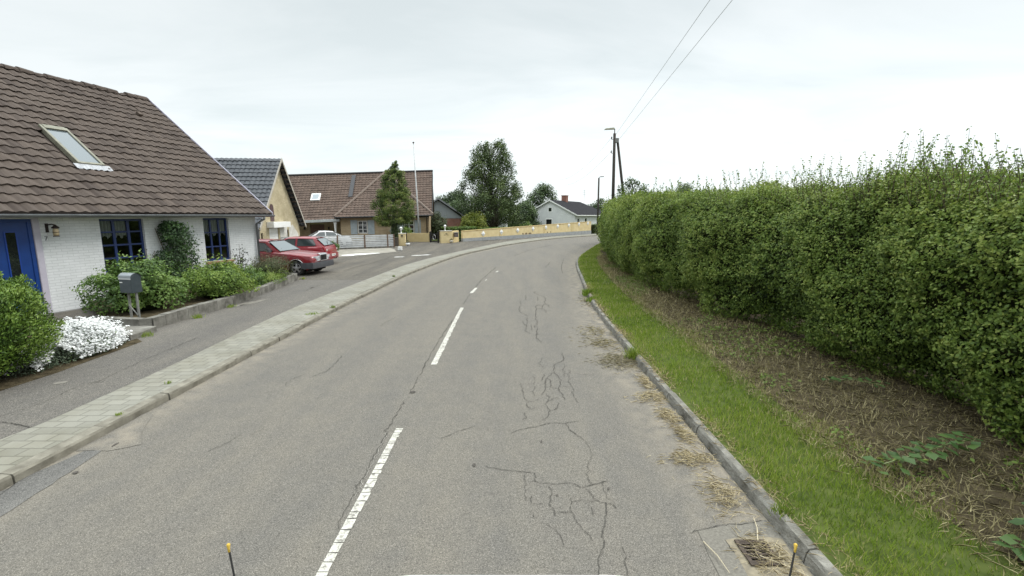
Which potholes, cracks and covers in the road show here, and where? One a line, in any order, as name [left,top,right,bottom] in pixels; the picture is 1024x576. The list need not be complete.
crack [487,296,628,575]
drain grate [734,539,784,566]
